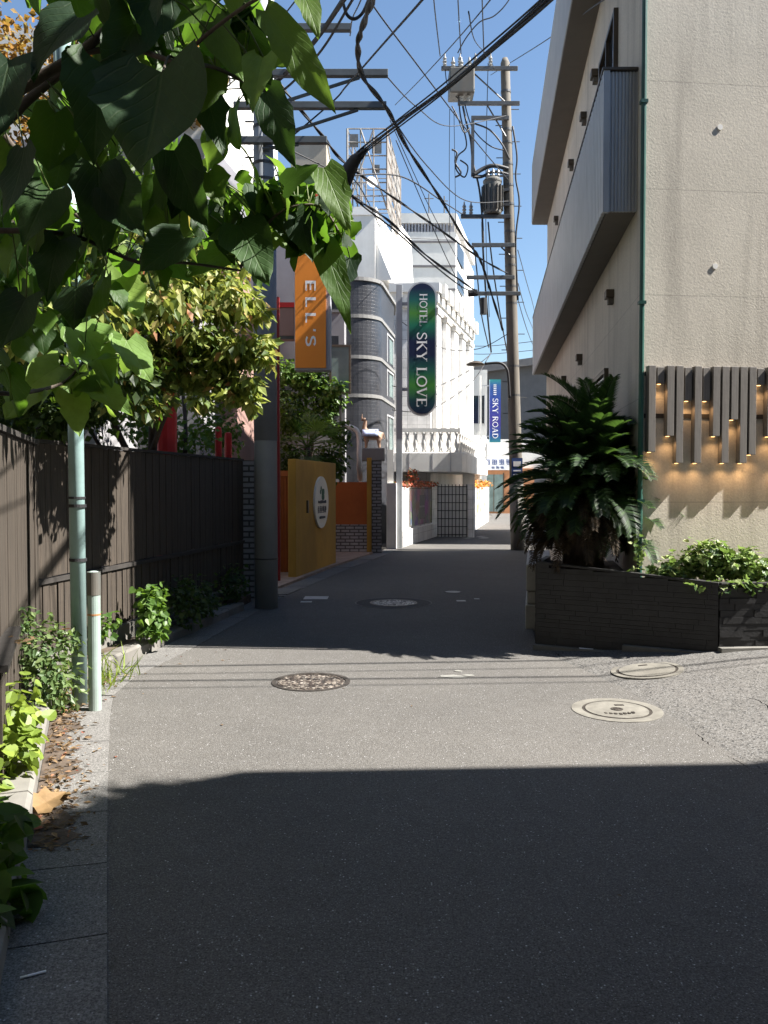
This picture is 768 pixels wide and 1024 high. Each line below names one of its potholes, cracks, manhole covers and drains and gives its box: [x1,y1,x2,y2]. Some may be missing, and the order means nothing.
manhole cover [355,598,432,609]
manhole cover [611,662,684,680]
manhole cover [571,698,664,723]
manhole cover [271,672,350,692]
